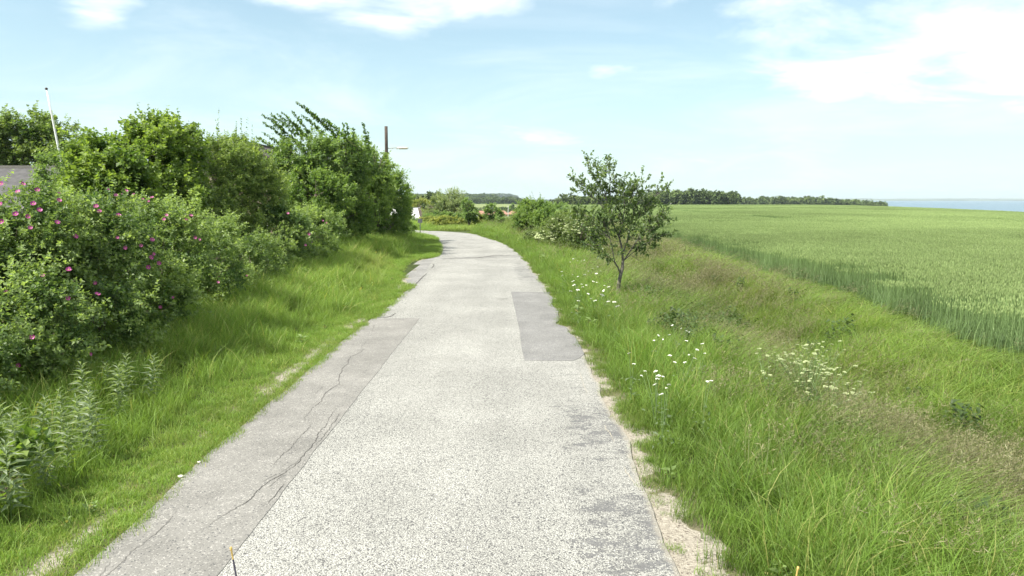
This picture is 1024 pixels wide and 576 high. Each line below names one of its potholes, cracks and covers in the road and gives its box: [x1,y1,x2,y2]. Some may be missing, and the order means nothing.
crack [193,313,395,534]
